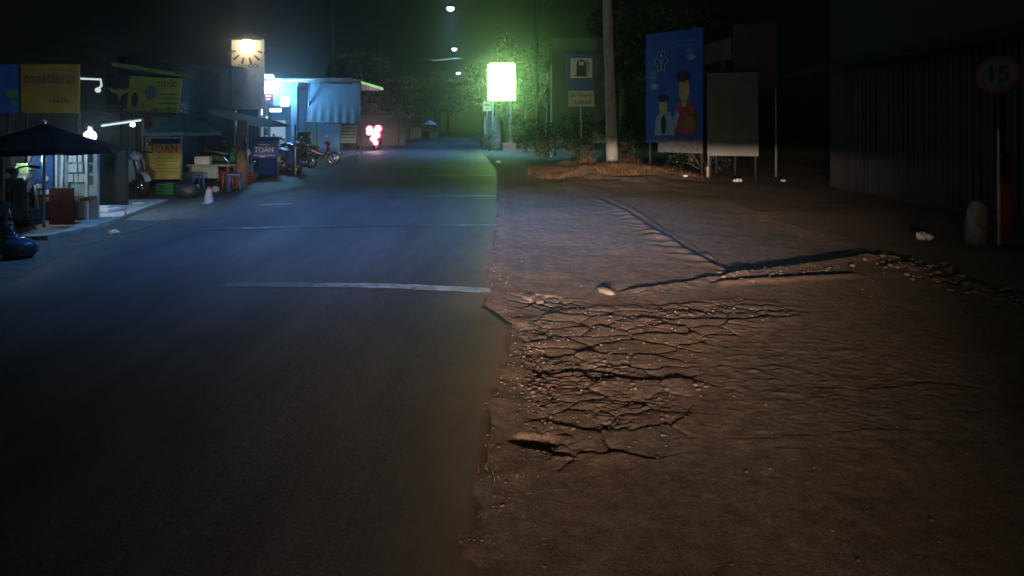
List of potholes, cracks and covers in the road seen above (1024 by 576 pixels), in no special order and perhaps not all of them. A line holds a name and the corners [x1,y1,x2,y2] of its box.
crack [495,194,995,472]
pothole [500,430,568,454]
